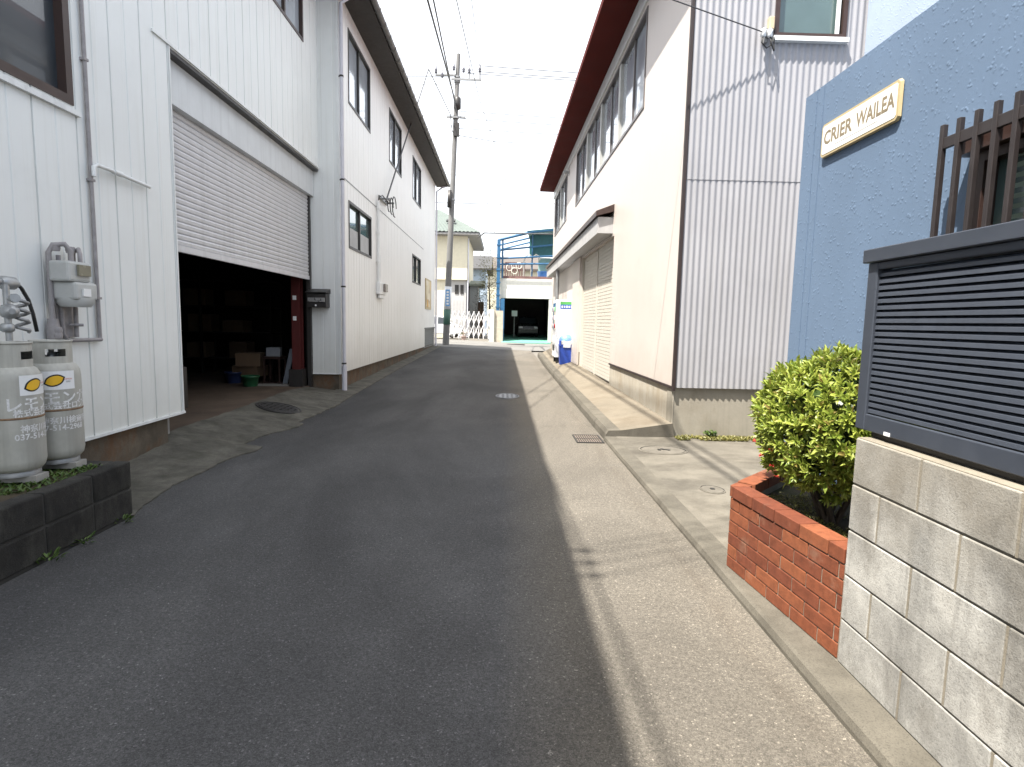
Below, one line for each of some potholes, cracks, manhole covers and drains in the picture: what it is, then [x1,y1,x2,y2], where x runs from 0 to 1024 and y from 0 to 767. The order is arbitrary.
manhole cover [638,446,688,455]
manhole cover [699,485,726,494]
manhole cover [256,401,302,414]
drain grate [572,434,605,444]
